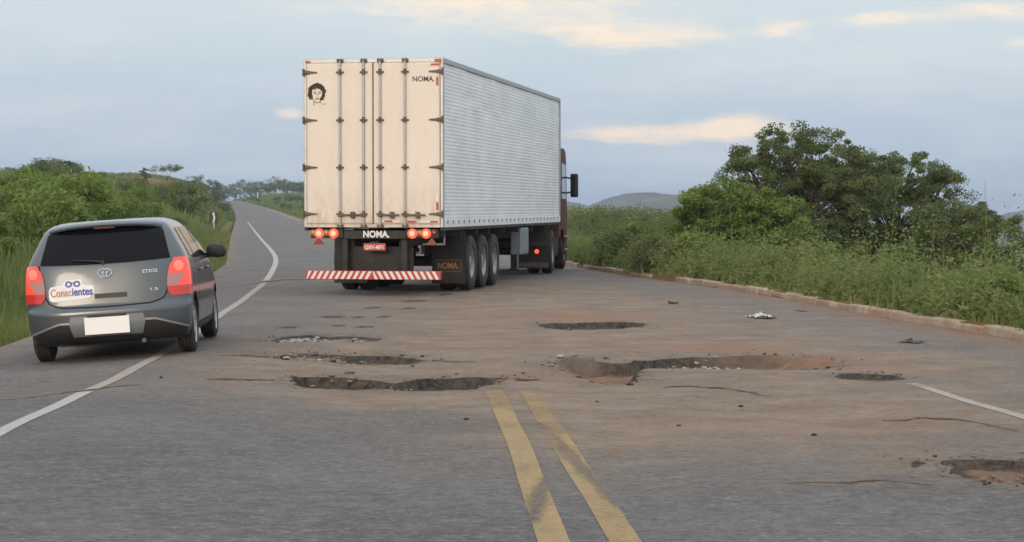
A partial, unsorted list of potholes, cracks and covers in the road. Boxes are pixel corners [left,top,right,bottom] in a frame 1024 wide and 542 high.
crack [663,386,763,396]
pothole [556,355,844,385]
crack [883,417,1017,432]
pothole [280,354,424,365]
pothole [289,377,509,391]
pothole [835,373,906,381]
pothole [941,459,1024,485]
pothole [539,322,645,330]
